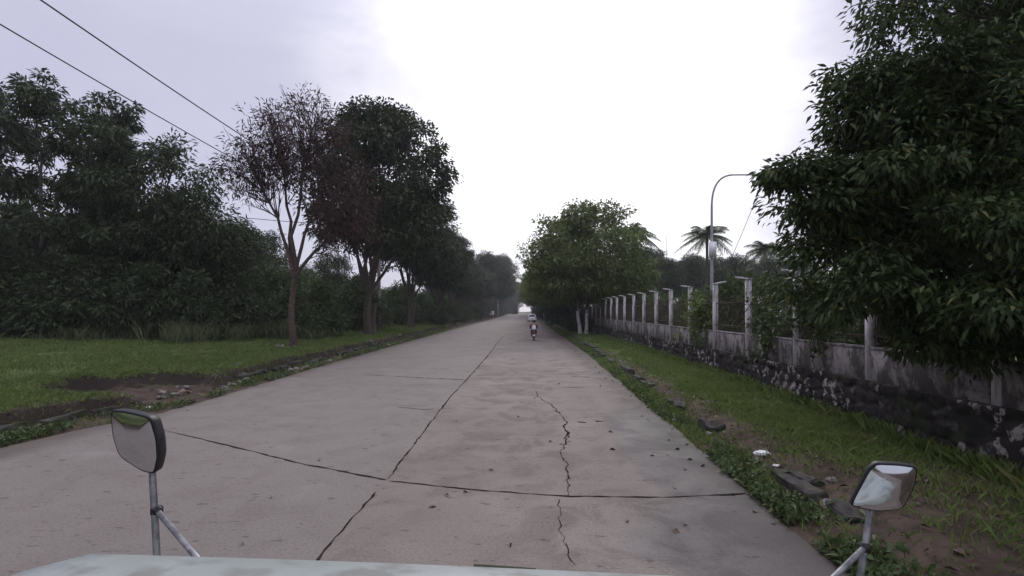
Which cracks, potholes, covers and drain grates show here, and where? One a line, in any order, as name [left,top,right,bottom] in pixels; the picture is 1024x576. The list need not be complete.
crack [535,390,600,563]
